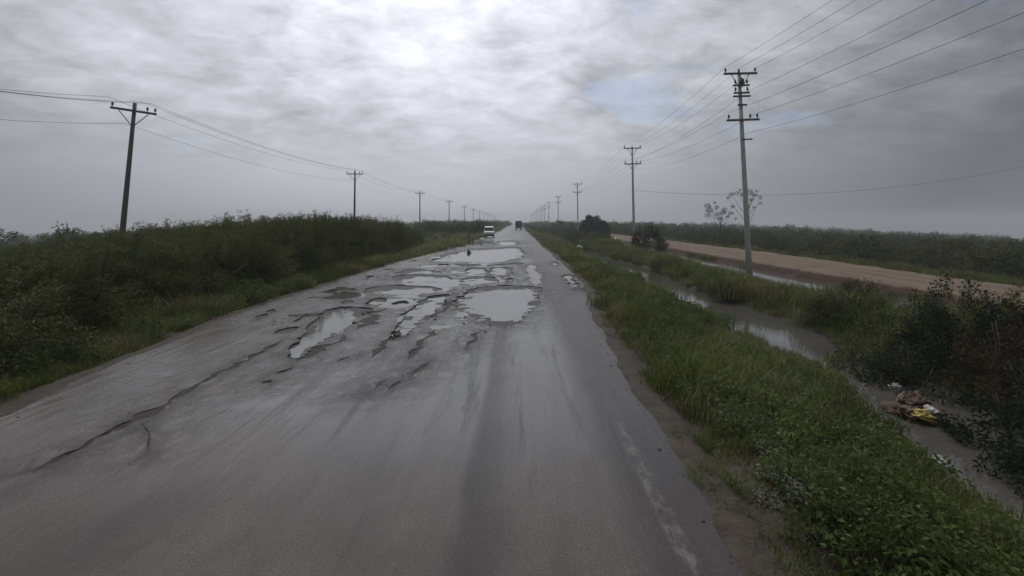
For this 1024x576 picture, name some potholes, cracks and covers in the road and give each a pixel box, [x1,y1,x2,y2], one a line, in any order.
pothole [363,285,442,295]
crack [464,330,482,350]
pothole [432,247,526,263]
pothole [561,274,583,293]
pothole [389,294,450,341]
pothole [453,285,543,326]
crack [32,309,436,473]
pothole [287,307,373,359]
pothole [365,298,387,306]
